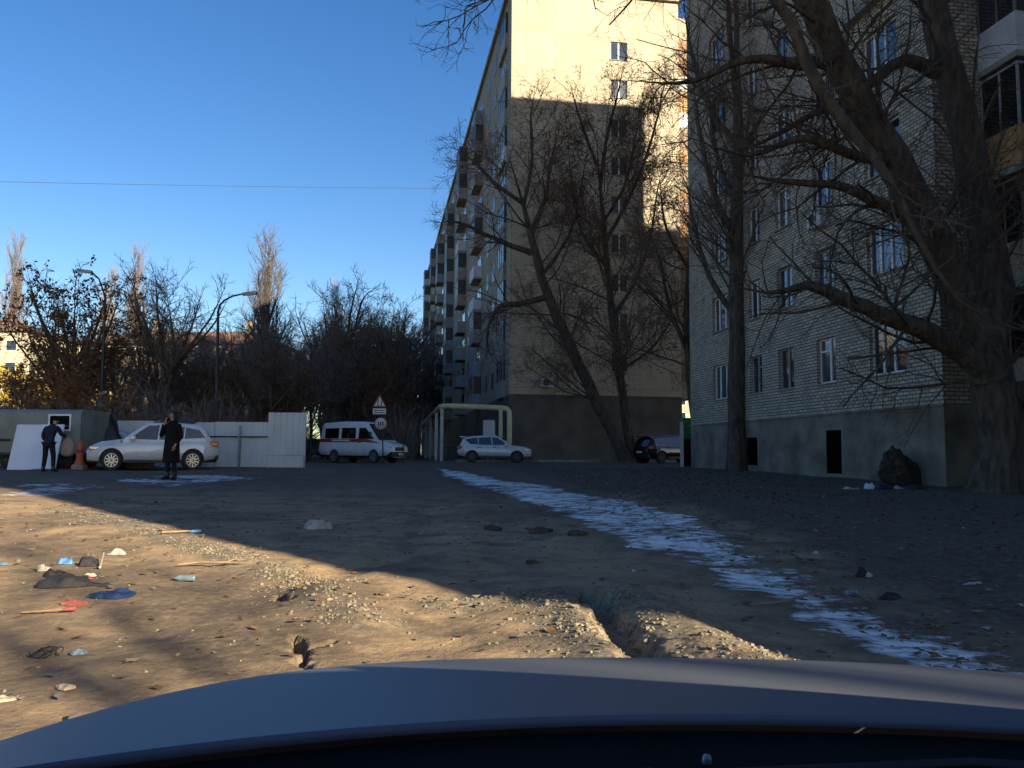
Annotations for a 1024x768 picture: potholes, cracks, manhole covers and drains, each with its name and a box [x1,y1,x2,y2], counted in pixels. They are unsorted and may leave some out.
pothole [540,583,710,658]
